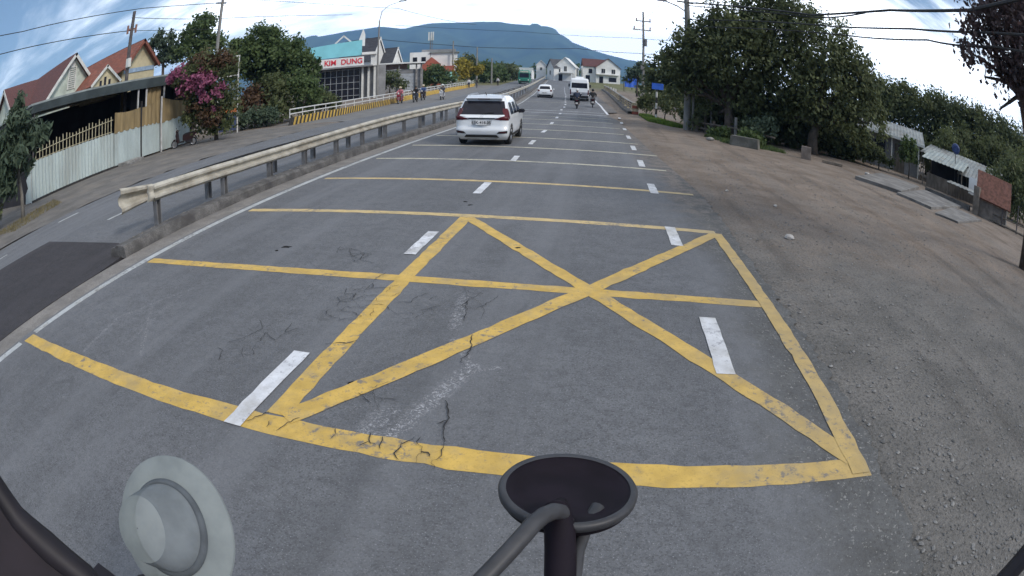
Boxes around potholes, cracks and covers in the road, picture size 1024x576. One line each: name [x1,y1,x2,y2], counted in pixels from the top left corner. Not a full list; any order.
crack [219,323,303,359]
crack [326,247,498,321]
crack [360,400,450,467]
